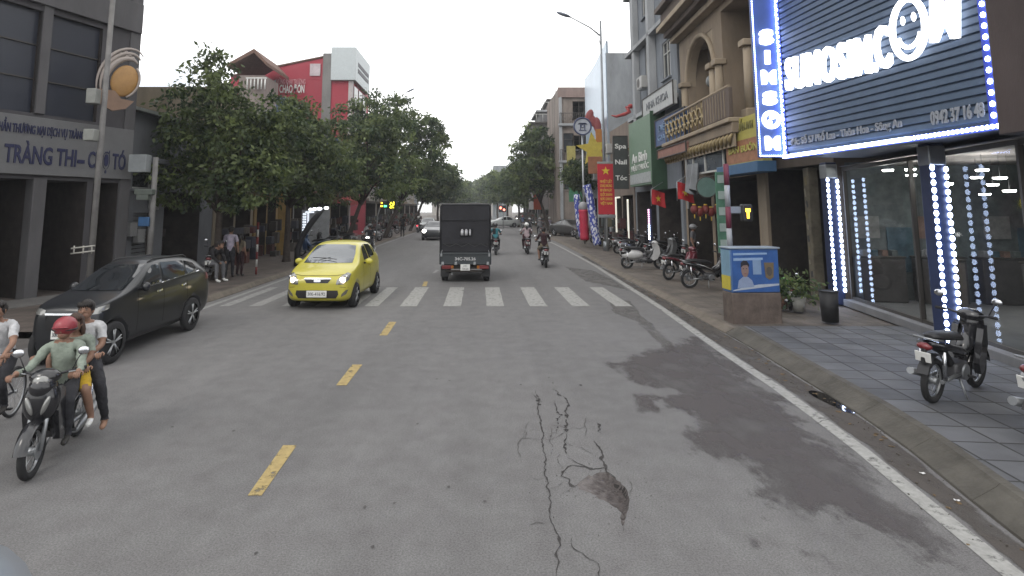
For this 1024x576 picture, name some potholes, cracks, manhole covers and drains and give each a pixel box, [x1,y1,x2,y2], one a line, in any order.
pothole [577,472,630,526]
crack [517,390,632,575]
